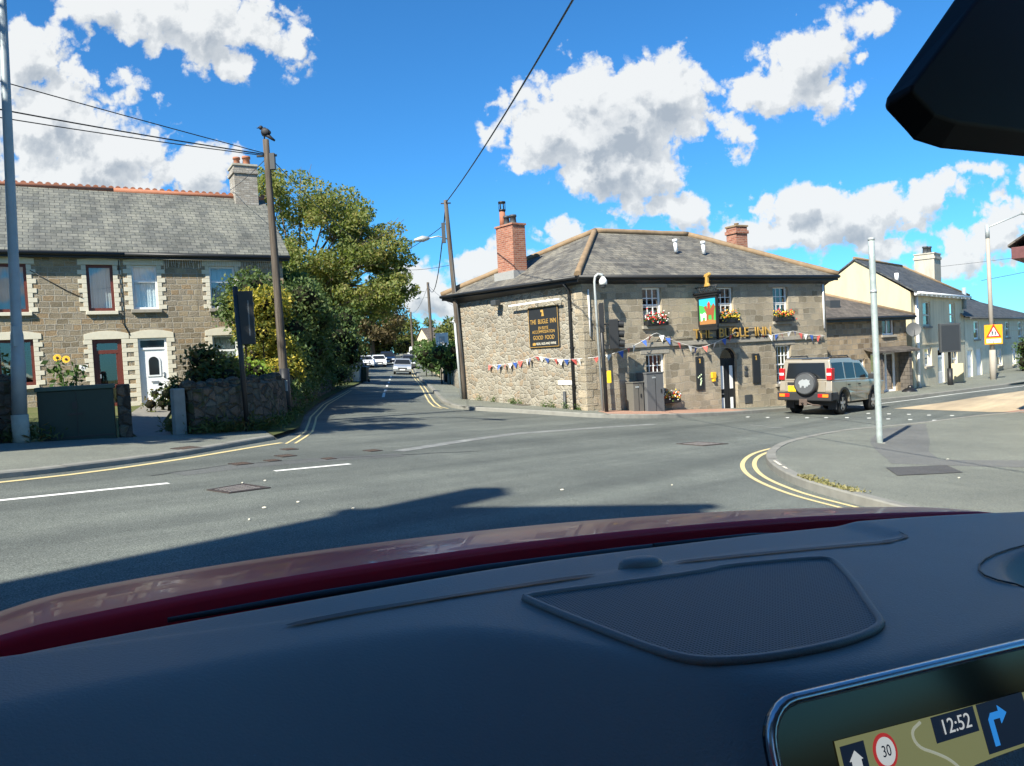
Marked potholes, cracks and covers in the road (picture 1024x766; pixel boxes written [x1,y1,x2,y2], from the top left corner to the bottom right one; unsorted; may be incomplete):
manhole cover [206,483,271,494]
